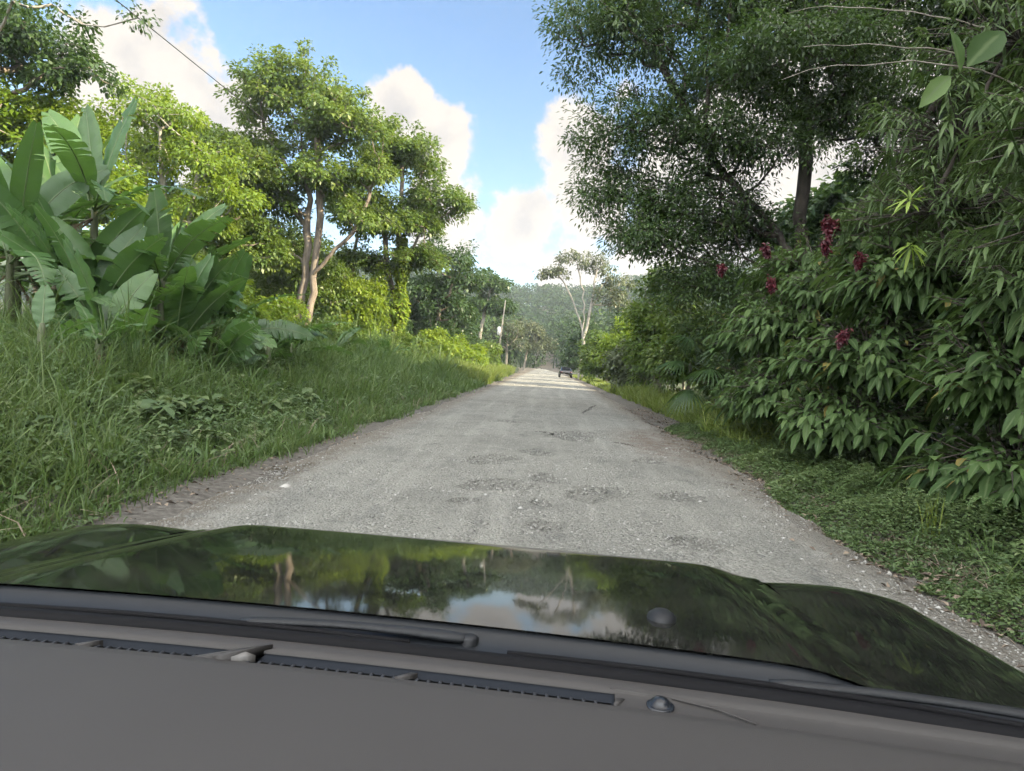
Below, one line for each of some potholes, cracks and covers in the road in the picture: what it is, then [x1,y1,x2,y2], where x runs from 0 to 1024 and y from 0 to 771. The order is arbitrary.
pothole [532,473,562,484]
pothole [447,497,482,505]
pothole [544,431,599,442]
pothole [654,491,708,503]
pothole [525,520,569,533]
pothole [454,477,541,491]
pothole [662,535,735,554]
pothole [465,454,522,465]
pothole [519,449,556,457]
pothole [565,485,633,504]
